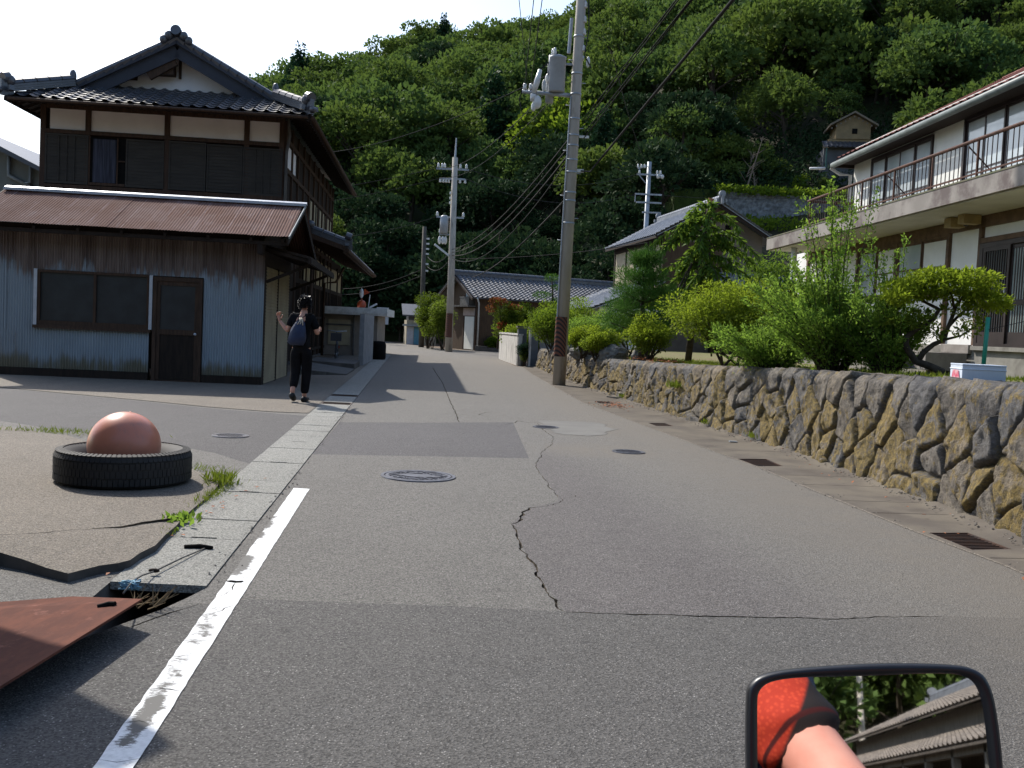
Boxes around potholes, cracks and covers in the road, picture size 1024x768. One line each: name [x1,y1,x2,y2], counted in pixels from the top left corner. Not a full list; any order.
crack [510,421,943,620]
manhole cover [380,470,456,482]
drain grate [931,533,1010,550]
crack [93,517,178,529]
